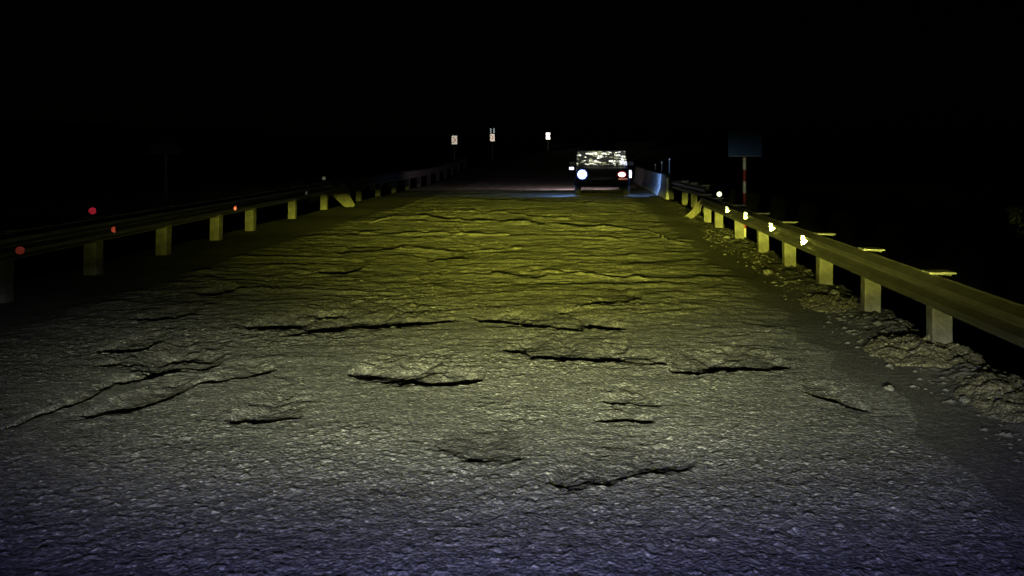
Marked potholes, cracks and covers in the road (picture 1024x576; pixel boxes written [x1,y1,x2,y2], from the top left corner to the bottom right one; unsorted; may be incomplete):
crack [374,197,683,252]
crack [552,269,630,278]
